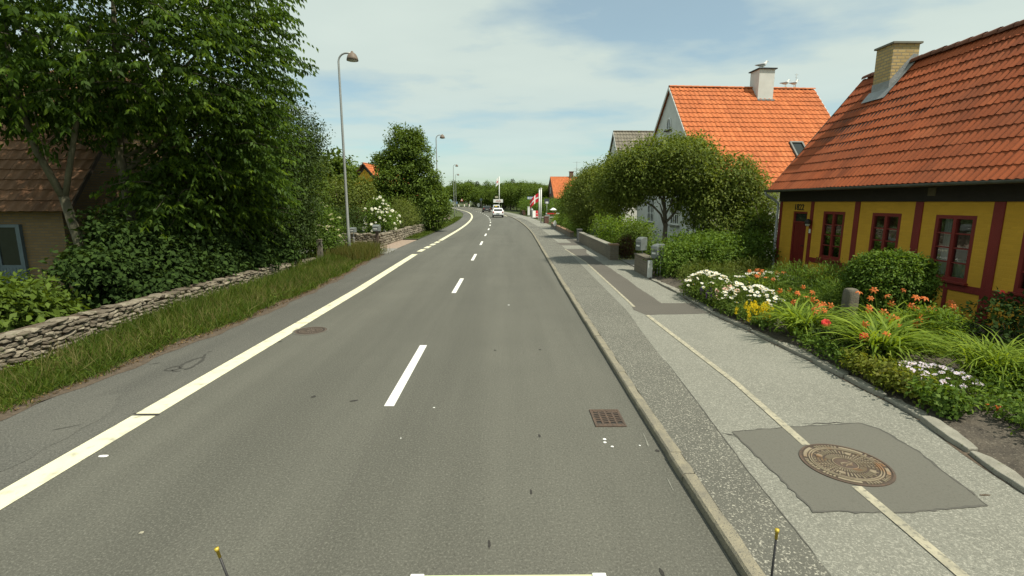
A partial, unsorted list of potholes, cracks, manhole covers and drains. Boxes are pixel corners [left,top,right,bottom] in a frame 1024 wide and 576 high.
manhole cover [799,444,896,487]
drain grate [589,409,627,427]
manhole cover [292,326,329,335]
